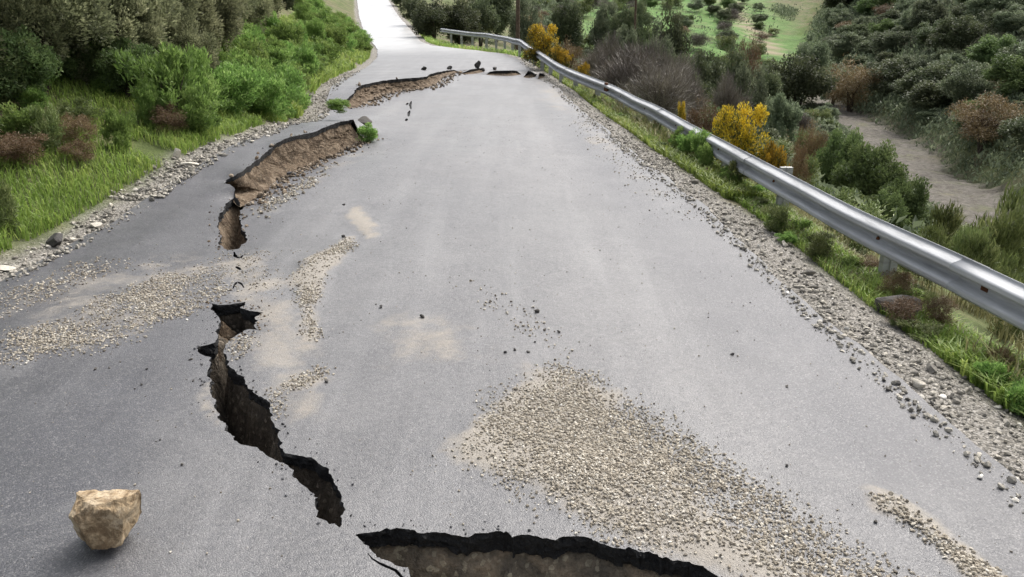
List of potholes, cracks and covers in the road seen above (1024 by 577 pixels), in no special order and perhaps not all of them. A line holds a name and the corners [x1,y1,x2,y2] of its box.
pothole [356,519,743,577]
crack [186,68,545,529]
